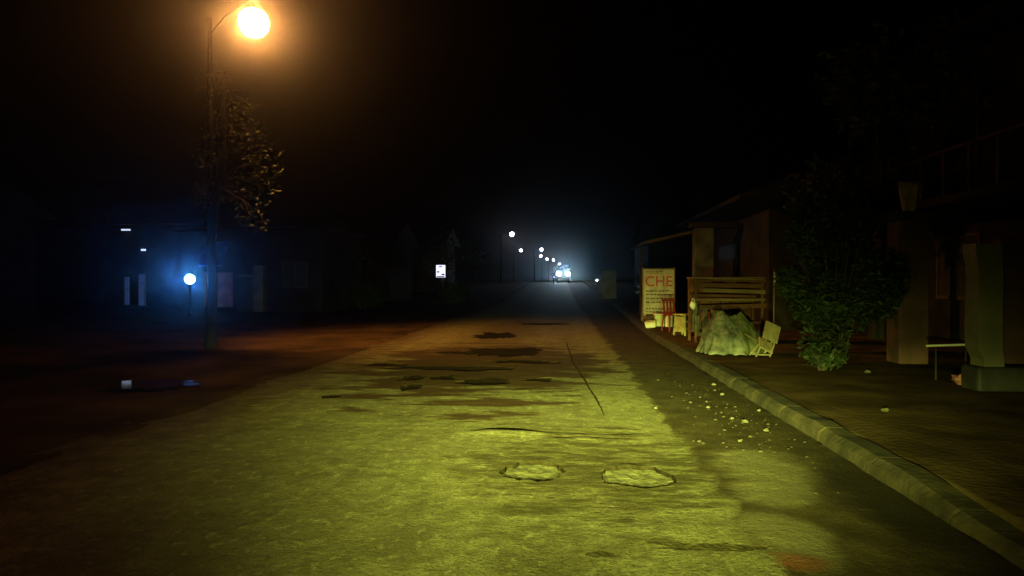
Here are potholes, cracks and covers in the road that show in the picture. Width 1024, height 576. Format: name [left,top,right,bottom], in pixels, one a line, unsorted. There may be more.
pothole [465,347,543,357]
crack [486,343,640,440]
pothole [600,464,676,489]
pothole [499,460,566,482]
